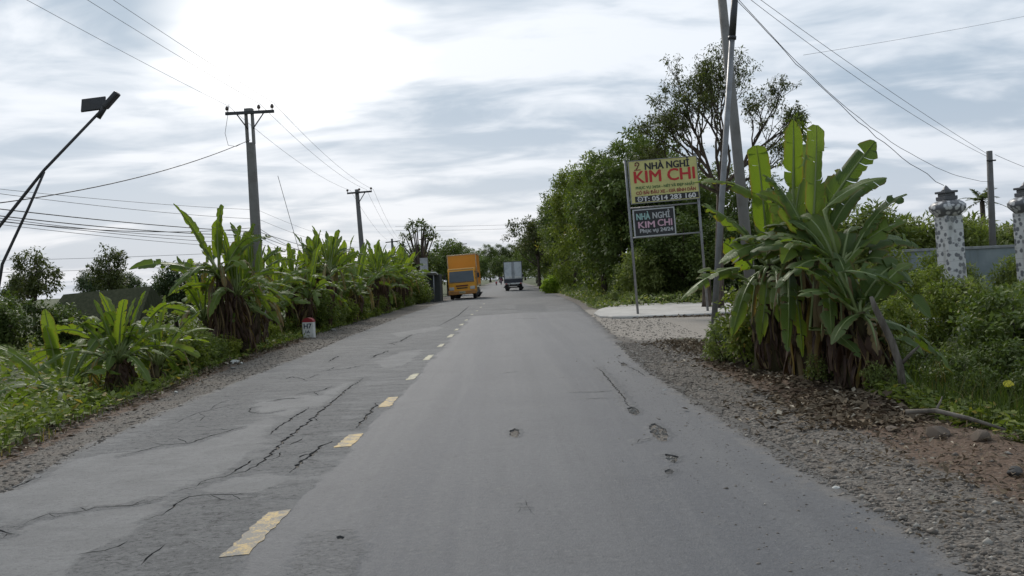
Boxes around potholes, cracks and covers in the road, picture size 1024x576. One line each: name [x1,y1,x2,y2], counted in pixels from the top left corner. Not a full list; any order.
crack [81,542,163,564]
pothole [649,423,668,442]
crack [26,356,360,523]
